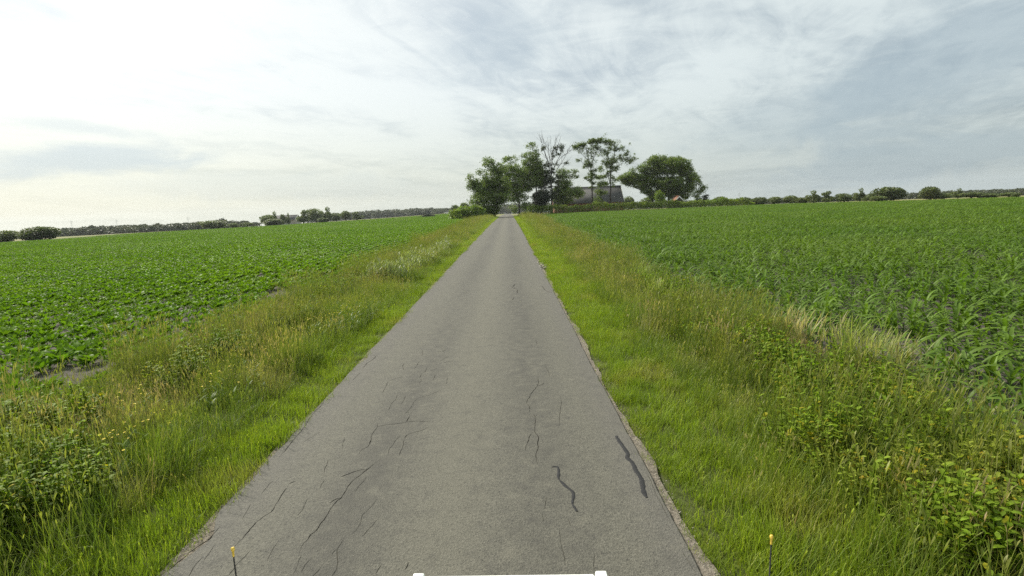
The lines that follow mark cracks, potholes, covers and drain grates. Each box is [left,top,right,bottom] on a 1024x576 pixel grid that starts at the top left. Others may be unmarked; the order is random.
crack [525,340,550,461]
crack [169,345,449,576]
